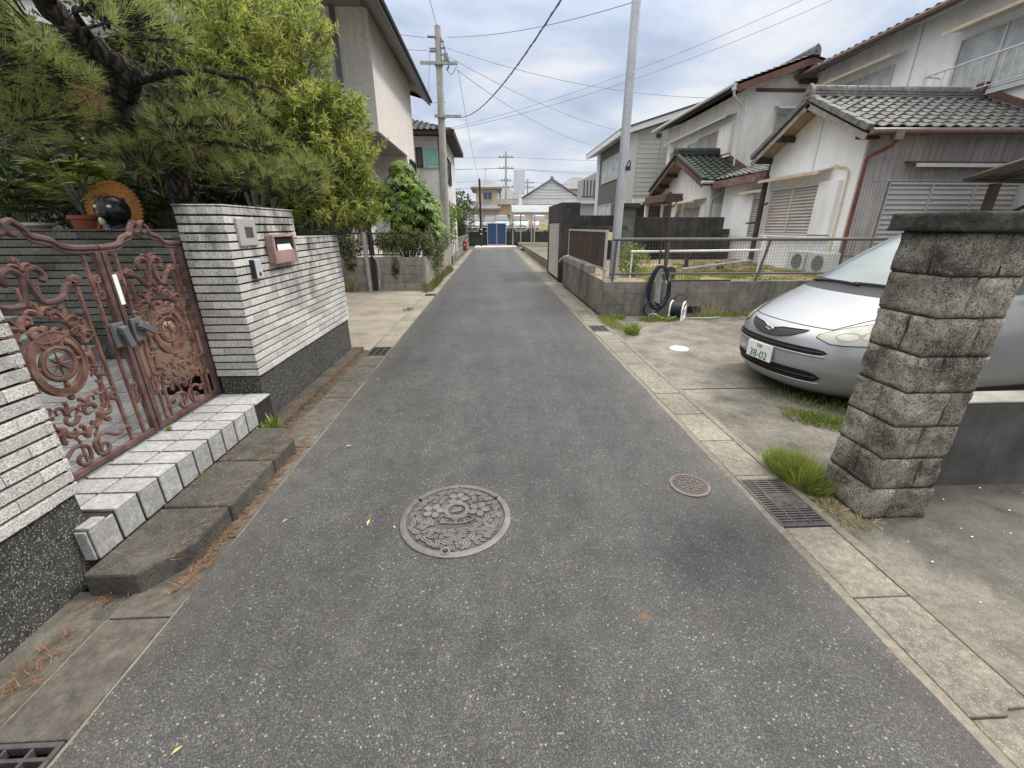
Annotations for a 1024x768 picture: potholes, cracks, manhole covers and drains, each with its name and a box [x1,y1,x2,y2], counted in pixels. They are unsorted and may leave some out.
drain grate [0,741,66,768]
manhole cover [400,485,511,559]
drain grate [365,347,392,356]
drain grate [737,478,832,528]
manhole cover [669,474,711,498]
